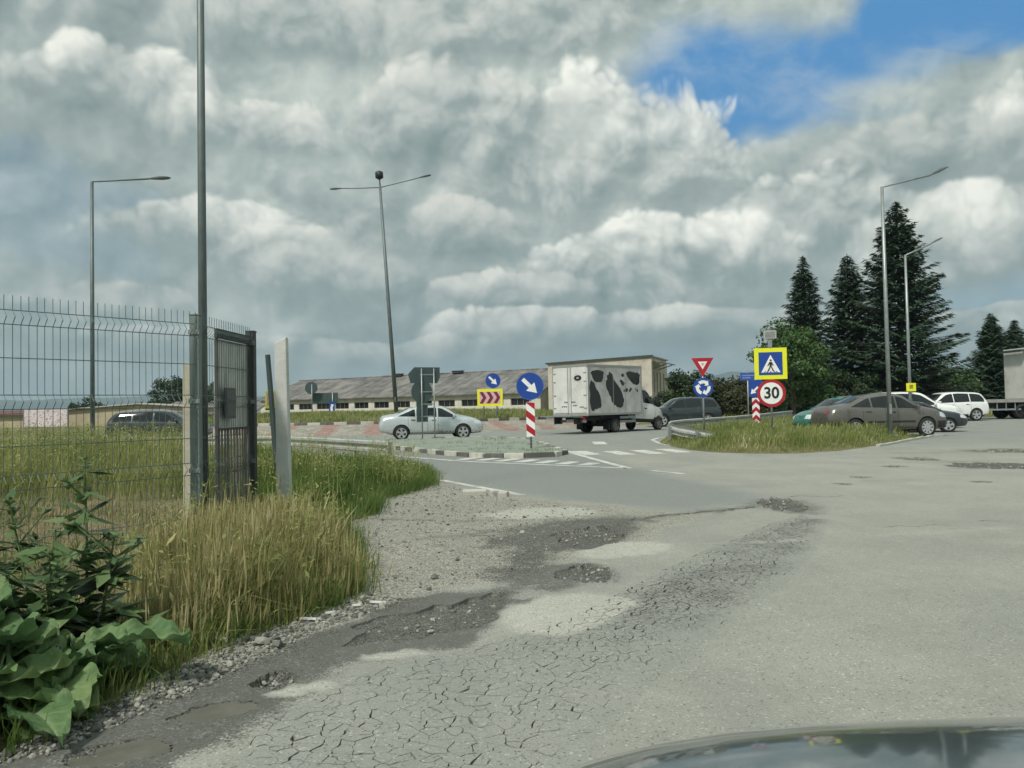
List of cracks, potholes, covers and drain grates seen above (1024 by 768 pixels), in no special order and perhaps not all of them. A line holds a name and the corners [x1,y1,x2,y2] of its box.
pothole [341,591,510,647]
pothole [247,670,301,690]
pothole [61,737,176,767]
pothole [553,562,613,583]
pothole [165,700,263,723]
pothole [756,496,809,512]
crack [222,506,829,768]
